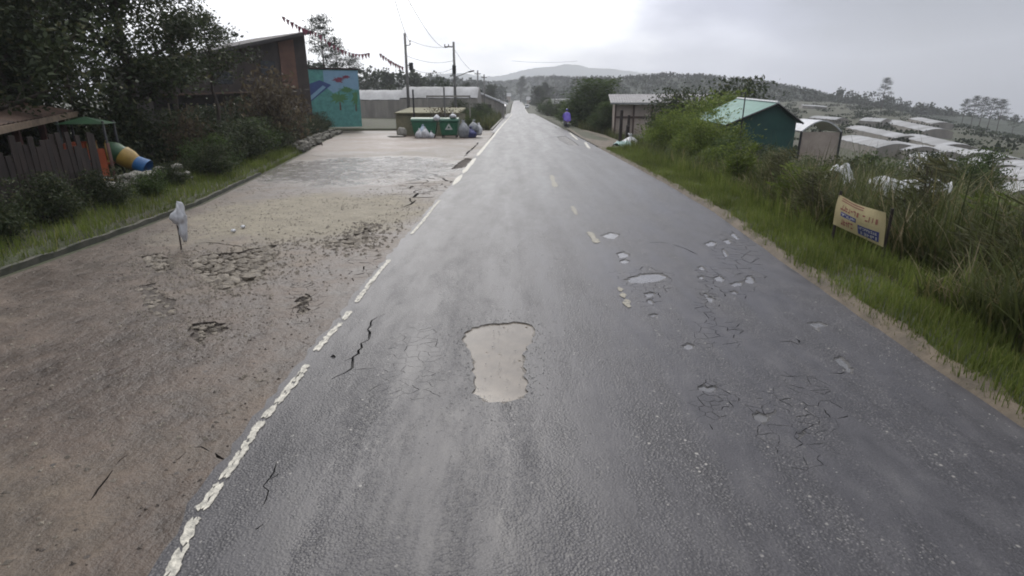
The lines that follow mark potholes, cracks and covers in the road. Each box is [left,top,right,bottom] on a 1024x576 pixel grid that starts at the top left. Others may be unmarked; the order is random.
crack [662,233,767,348]
pothole [624,273,669,284]
crack [689,371,849,470]
pothole [807,321,828,333]
crack [332,314,441,400]
crack [91,454,128,500]
pothole [462,321,535,403]
crack [263,462,280,506]
pothole [833,356,854,374]
crack [394,169,453,207]
pothole [293,293,313,314]
pothole [187,321,229,343]
